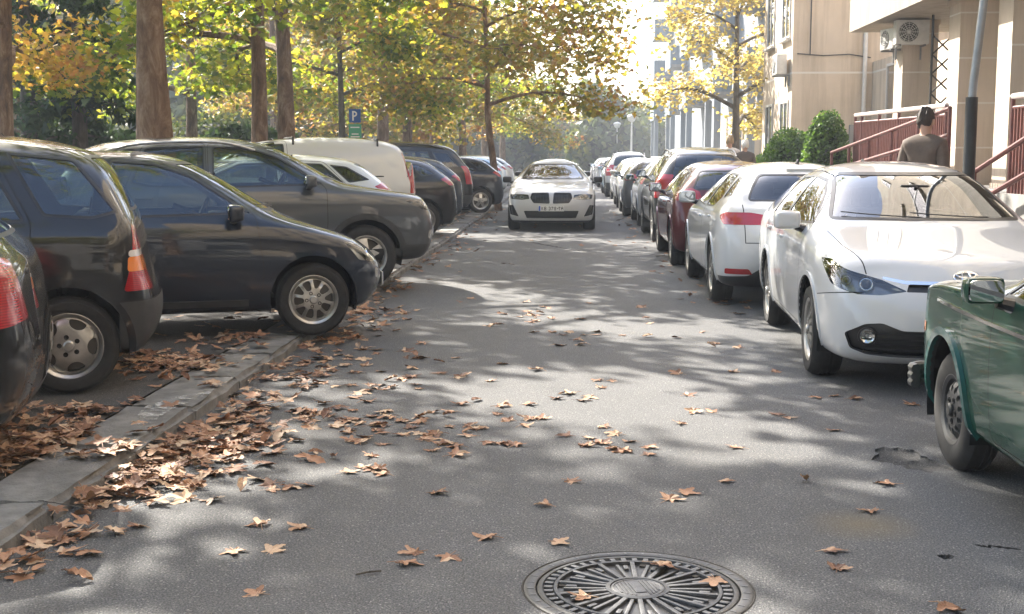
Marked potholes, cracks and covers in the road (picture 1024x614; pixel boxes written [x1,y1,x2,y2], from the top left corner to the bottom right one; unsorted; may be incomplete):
manhole cover [521,551,756,614]
pothole [871,447,953,473]
